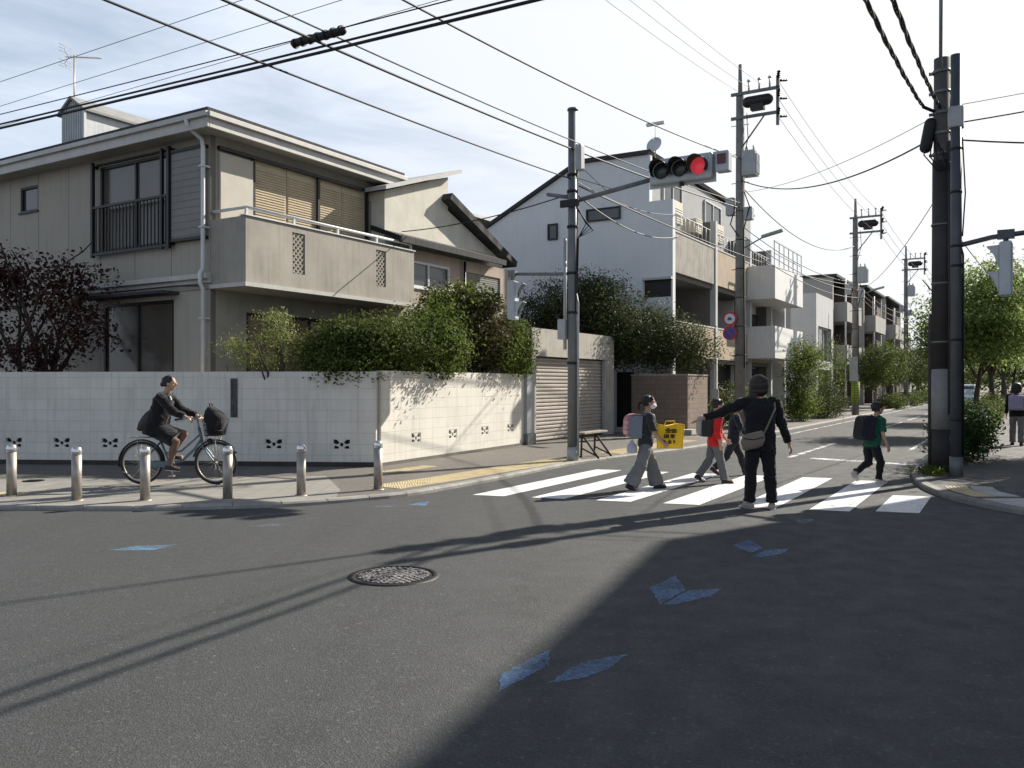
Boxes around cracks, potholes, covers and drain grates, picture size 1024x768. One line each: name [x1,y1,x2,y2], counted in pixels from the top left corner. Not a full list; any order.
manhole cover [347,566,440,587]
